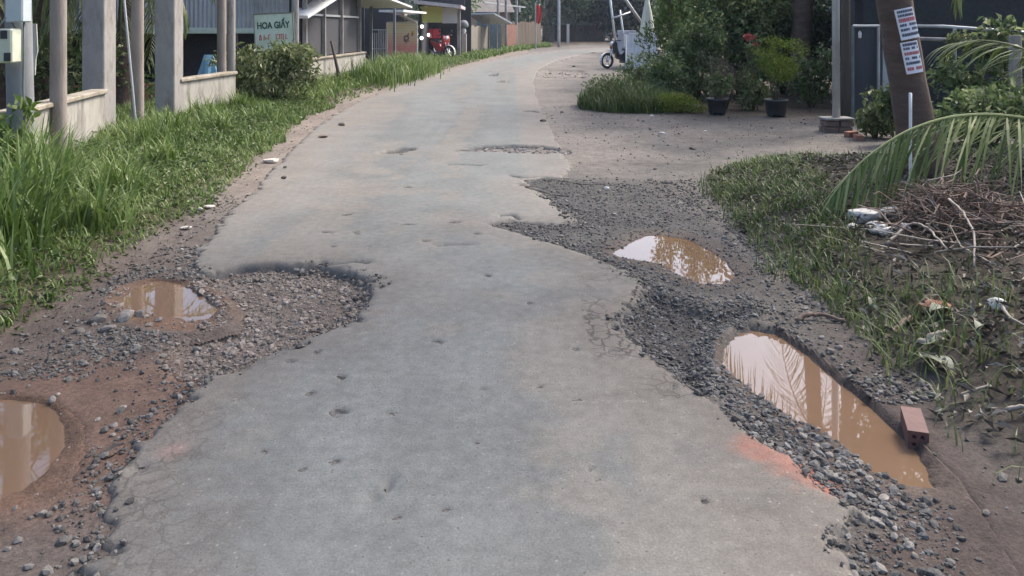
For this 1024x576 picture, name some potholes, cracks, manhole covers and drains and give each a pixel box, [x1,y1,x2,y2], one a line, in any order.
crack [611,328,638,346]
pothole [709,327,1020,576]
pothole [477,146,572,155]
pothole [0,392,86,525]
pothole [99,277,246,345]
pothole [157,264,378,383]
pothole [491,178,763,303]
